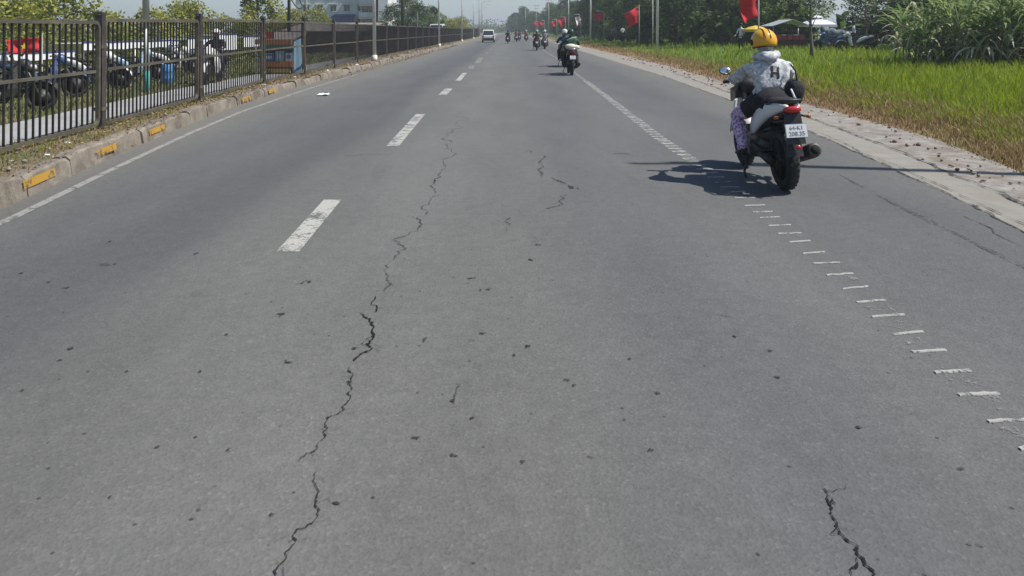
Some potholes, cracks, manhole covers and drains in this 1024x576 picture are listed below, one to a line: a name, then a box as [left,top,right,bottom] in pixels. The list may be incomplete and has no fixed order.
crack [819,132,1023,247]
crack [271,113,471,576]
crack [824,487,876,576]
